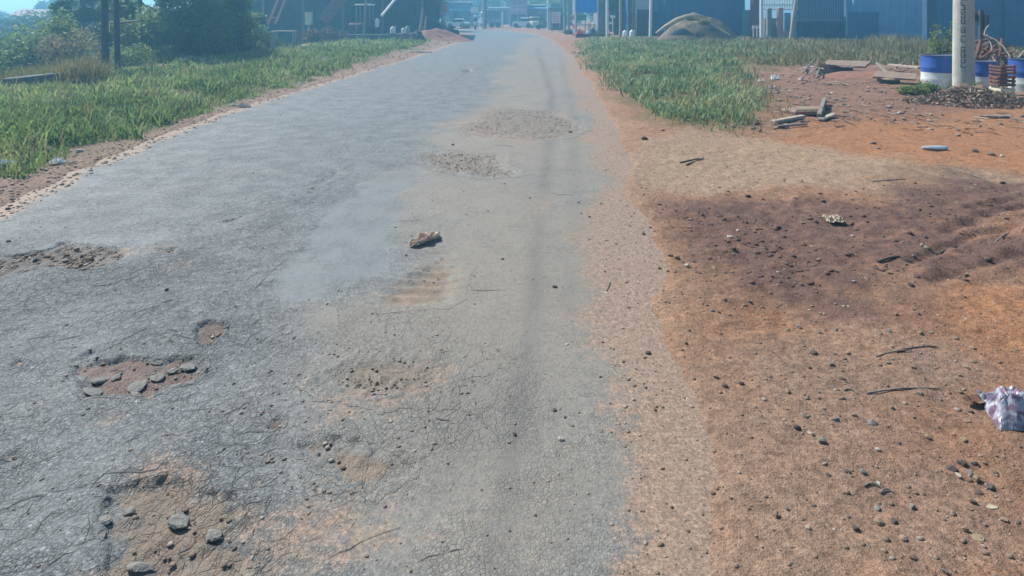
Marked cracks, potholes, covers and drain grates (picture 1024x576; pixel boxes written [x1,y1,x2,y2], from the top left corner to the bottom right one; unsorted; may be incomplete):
crack [209,485,400,574]
pothole [190,317,230,347]
pothole [66,348,217,401]
pothole [451,107,592,141]
pothole [91,469,261,576]
pothole [0,240,132,279]
pothole [408,149,533,180]
crack [0,191,327,574]
